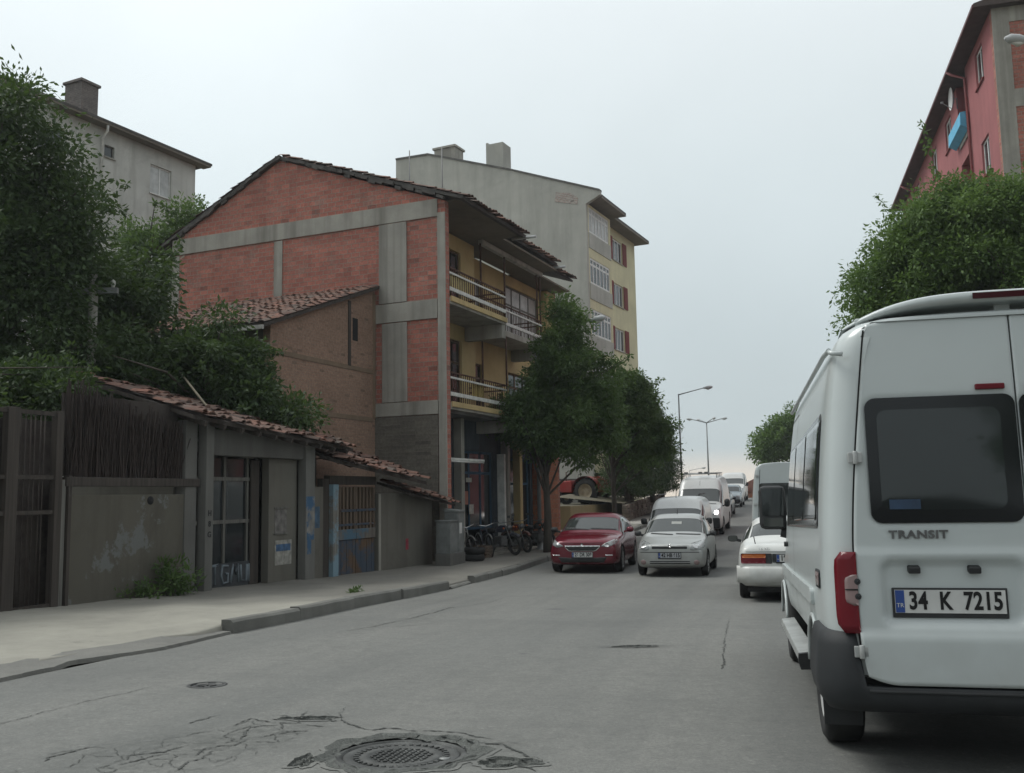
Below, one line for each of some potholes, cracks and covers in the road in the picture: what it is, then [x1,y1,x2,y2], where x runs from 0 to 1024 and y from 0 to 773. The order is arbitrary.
manhole cover [332,739,468,773]
crack [325,708,543,771]
manhole cover [186,681,228,689]
crack [15,711,331,773]
